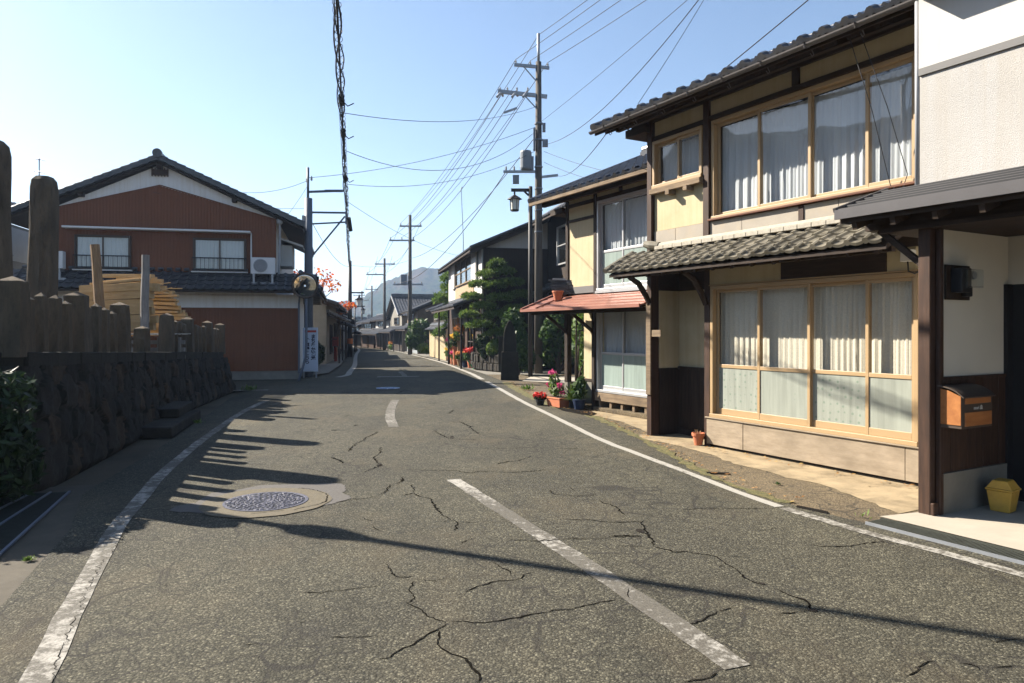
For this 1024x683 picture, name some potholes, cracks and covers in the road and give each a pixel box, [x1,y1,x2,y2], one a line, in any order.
manhole cover [198,488,332,518]
crack [308,563,613,682]
crack [778,589,811,614]
crack [254,424,540,544]
crack [511,501,760,584]
